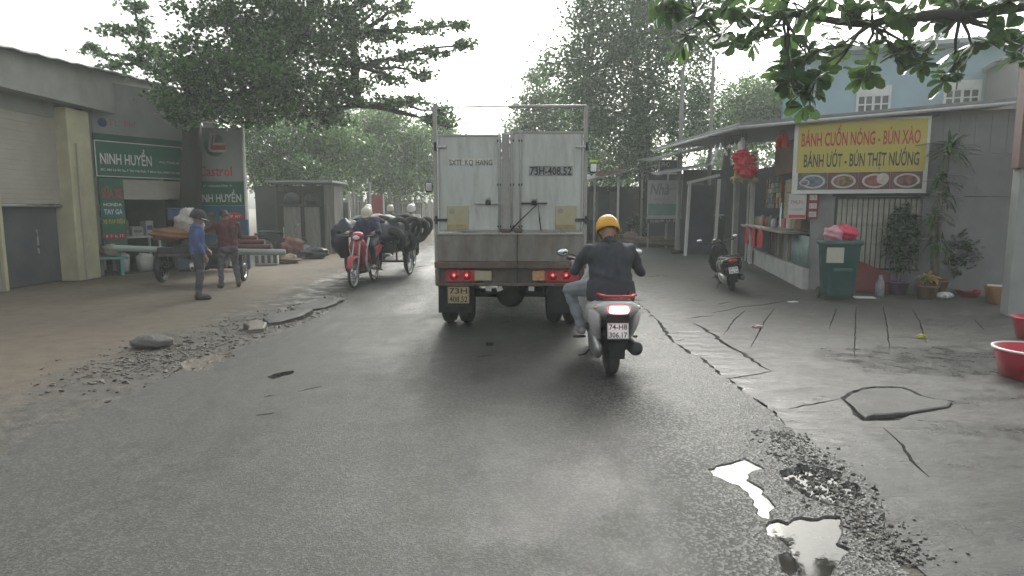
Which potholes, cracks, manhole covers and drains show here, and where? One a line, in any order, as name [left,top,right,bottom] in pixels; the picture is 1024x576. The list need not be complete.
pothole [779,464,865,506]
pothole [708,458,776,521]
crack [643,299,956,477]
pothole [268,371,294,379]
pothole [765,516,851,576]
pothole [180,351,235,371]
